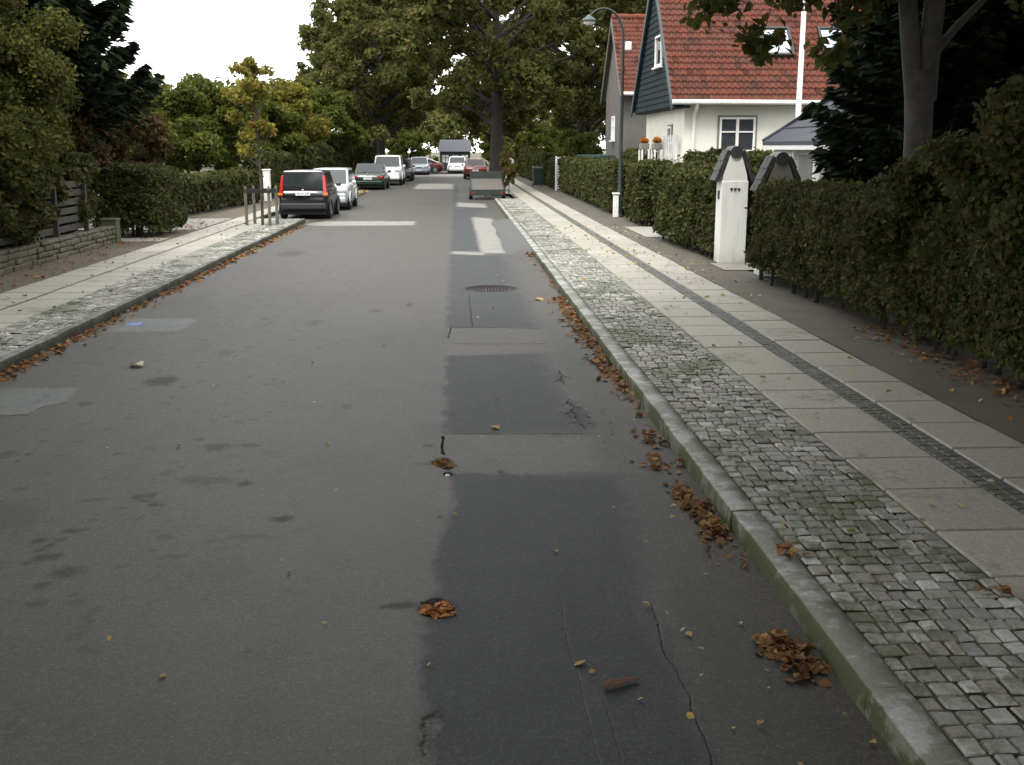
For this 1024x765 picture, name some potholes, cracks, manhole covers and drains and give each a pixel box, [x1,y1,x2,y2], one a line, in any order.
crack [441,370,598,436]
crack [548,589,639,765]
pothole [408,593,468,625]
